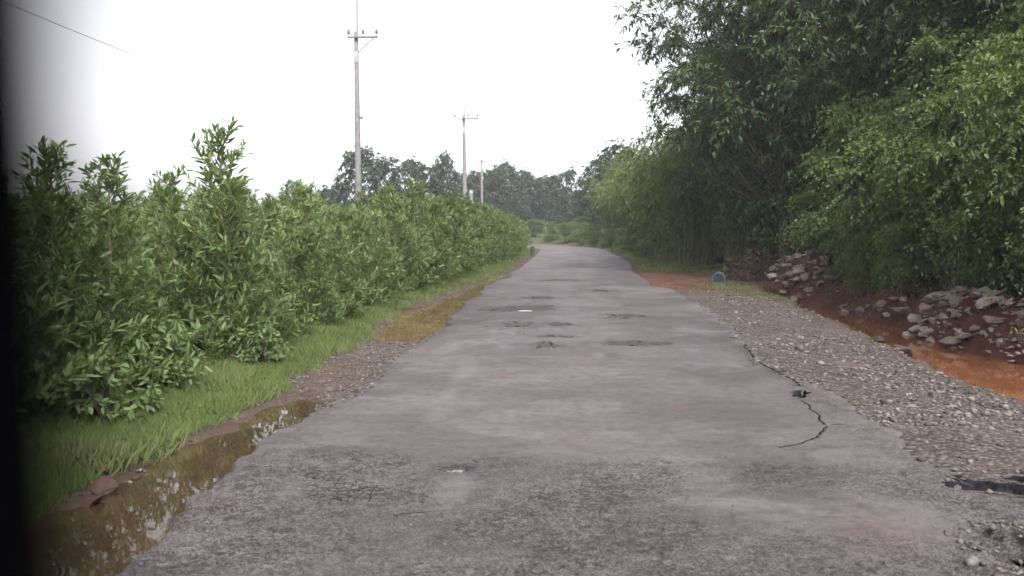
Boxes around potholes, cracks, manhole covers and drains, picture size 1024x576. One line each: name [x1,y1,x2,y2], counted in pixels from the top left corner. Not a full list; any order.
crack [301,468,435,518]
pothole [429,462,484,475]
pothole [934,474,1024,497]
pothole [529,340,566,350]
pothole [494,320,541,329]
pothole [785,389,816,400]
pothole [471,305,562,313]
crack [739,344,850,449]
